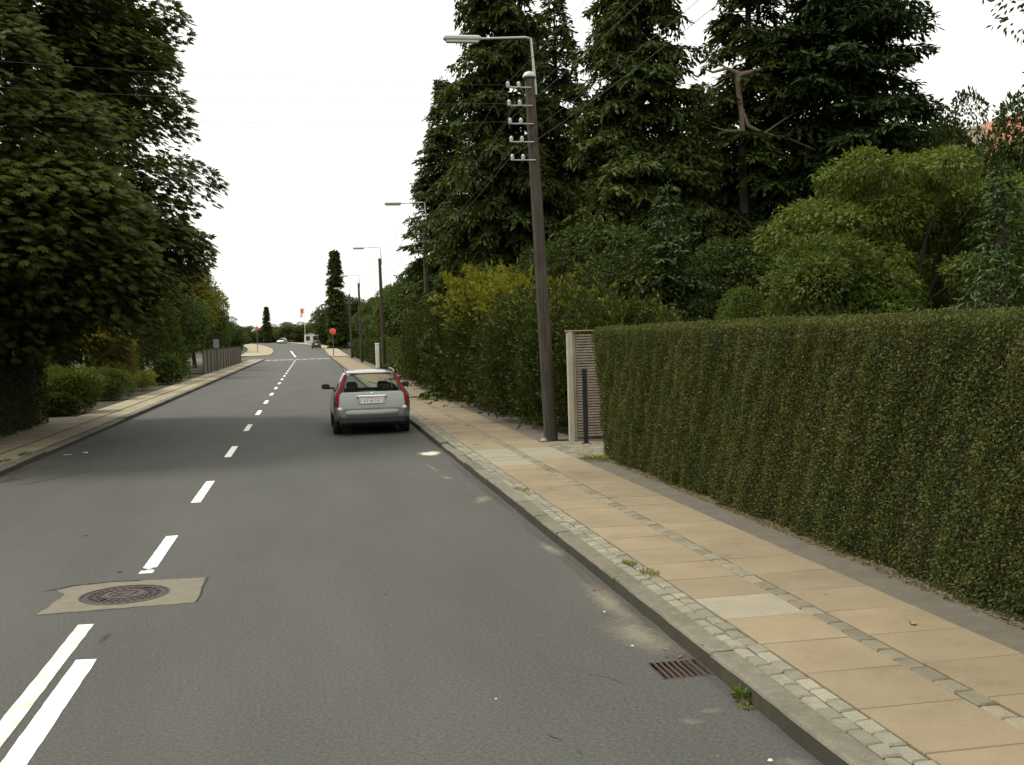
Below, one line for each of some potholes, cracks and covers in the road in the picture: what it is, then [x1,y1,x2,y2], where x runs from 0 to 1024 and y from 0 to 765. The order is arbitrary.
drain grate [647,659,715,680]
manhole cover [78,584,170,605]
